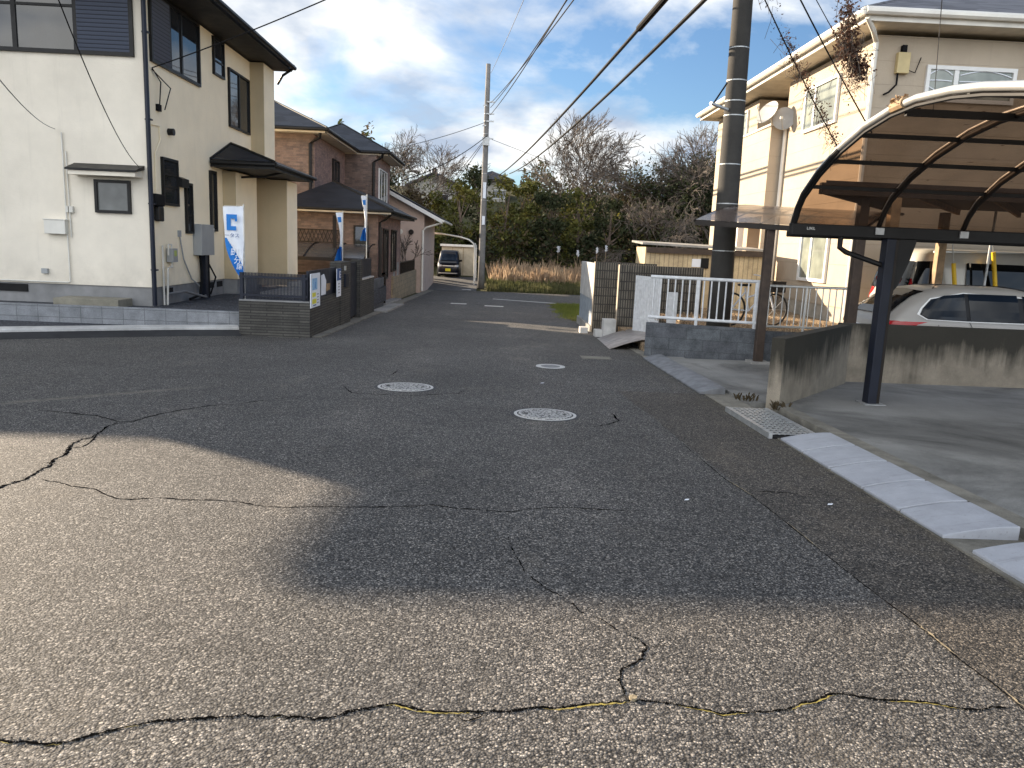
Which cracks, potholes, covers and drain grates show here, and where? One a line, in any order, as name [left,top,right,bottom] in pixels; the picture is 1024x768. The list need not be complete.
crack [0,396,644,512]
drain grate [725,407,815,439]
manhole cover [510,408,580,422]
manhole cover [374,382,437,392]
crack [0,535,1010,748]
